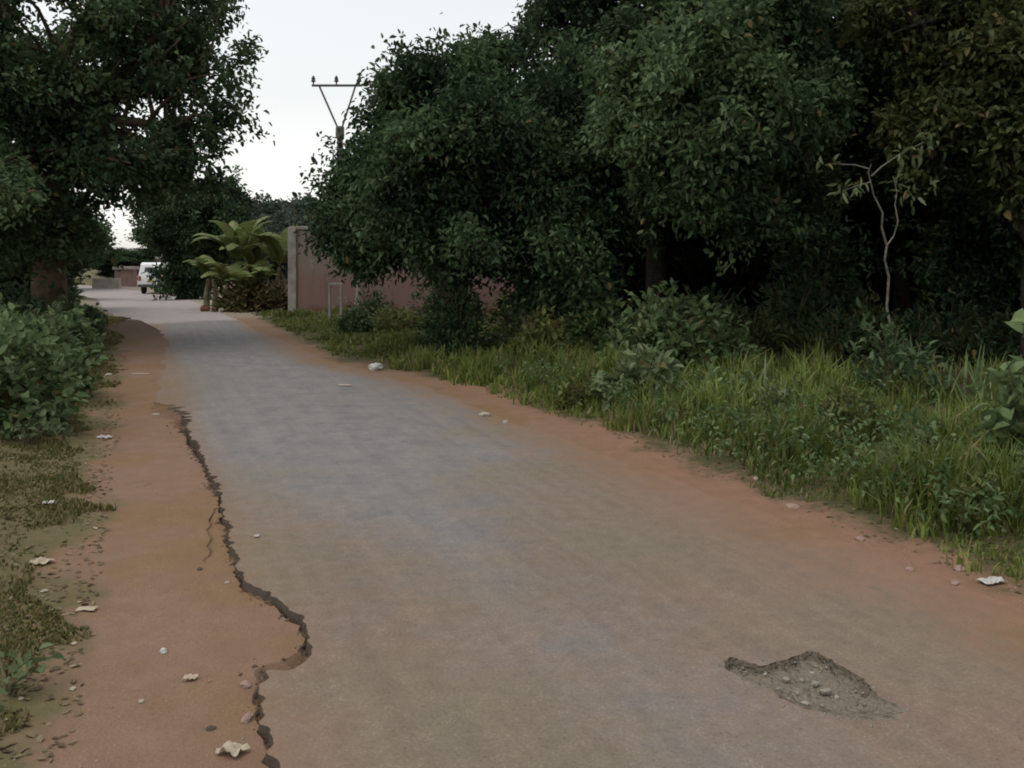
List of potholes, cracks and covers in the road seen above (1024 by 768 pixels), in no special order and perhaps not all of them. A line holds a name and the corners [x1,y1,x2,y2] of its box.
pothole [714,647,911,734]
crack [147,403,313,768]
